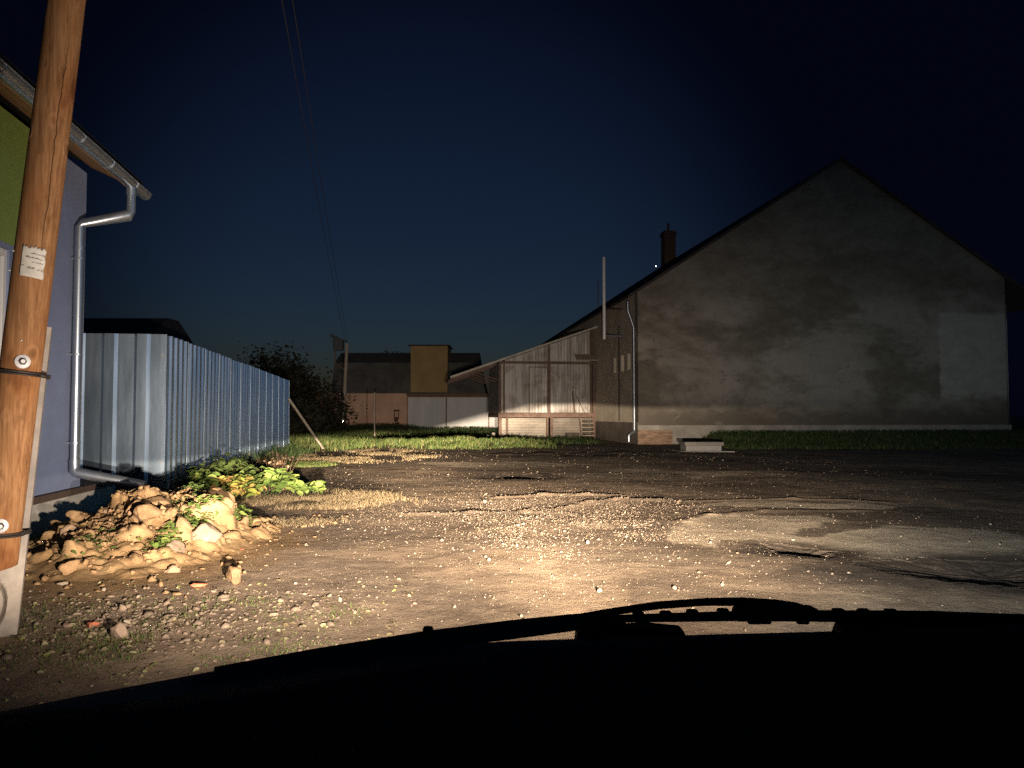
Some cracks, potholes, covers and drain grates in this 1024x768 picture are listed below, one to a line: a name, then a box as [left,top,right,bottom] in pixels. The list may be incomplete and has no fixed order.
pothole [841,557,1024,589]
pothole [756,543,842,559]
